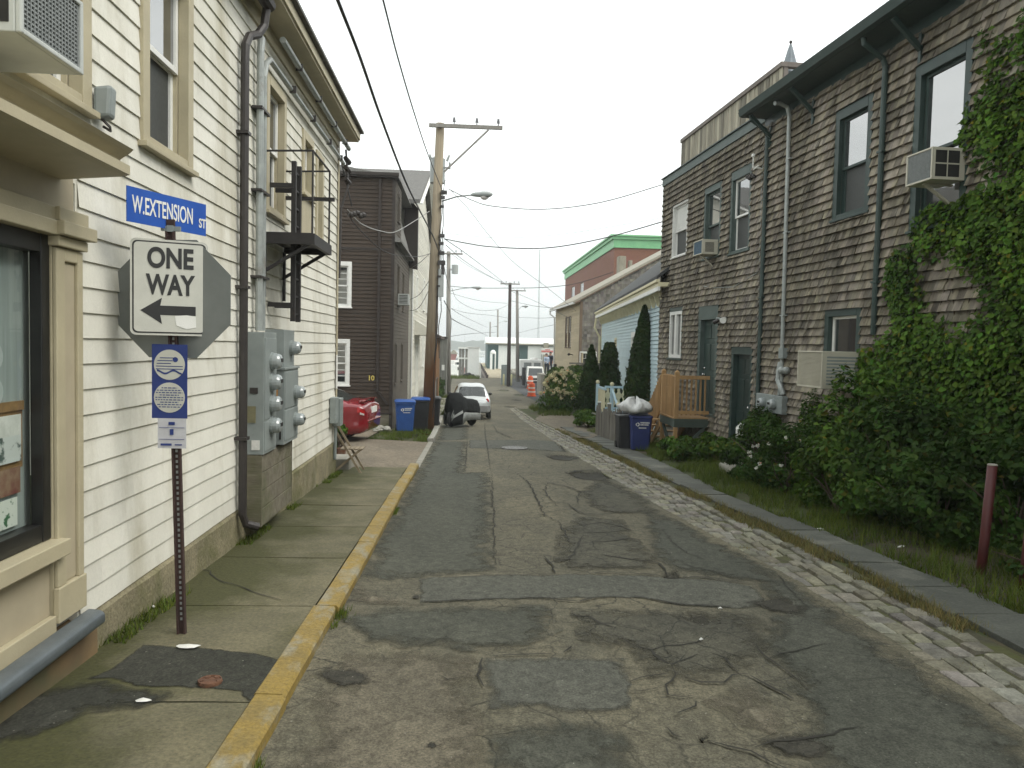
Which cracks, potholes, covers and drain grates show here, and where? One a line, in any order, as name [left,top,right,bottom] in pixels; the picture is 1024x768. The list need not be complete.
crack [708,726,858,768]
crack [518,596,825,698]
crack [459,445,752,584]
